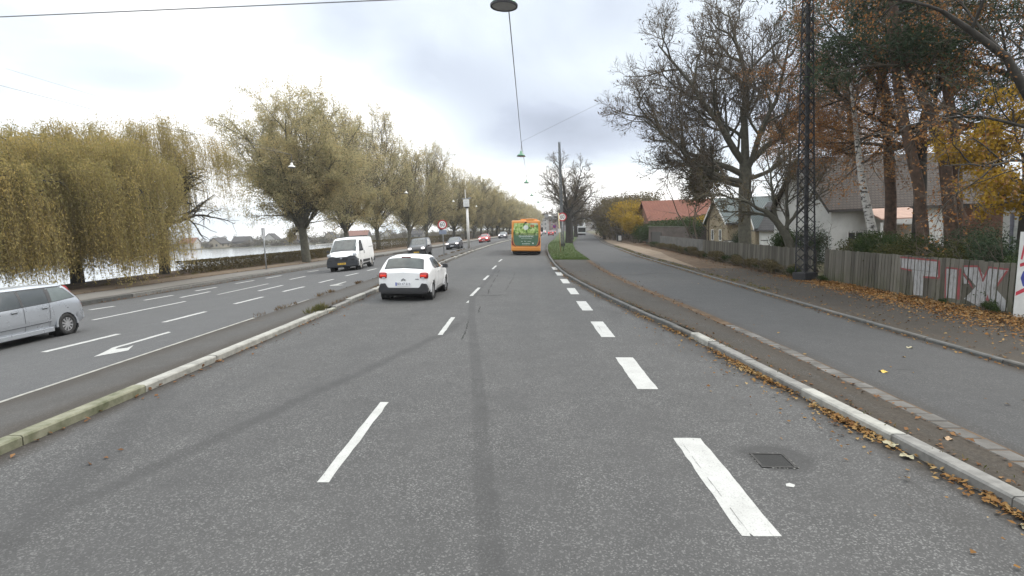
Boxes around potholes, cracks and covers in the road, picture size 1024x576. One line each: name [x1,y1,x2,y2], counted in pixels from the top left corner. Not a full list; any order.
manhole cover [748,452,800,470]
